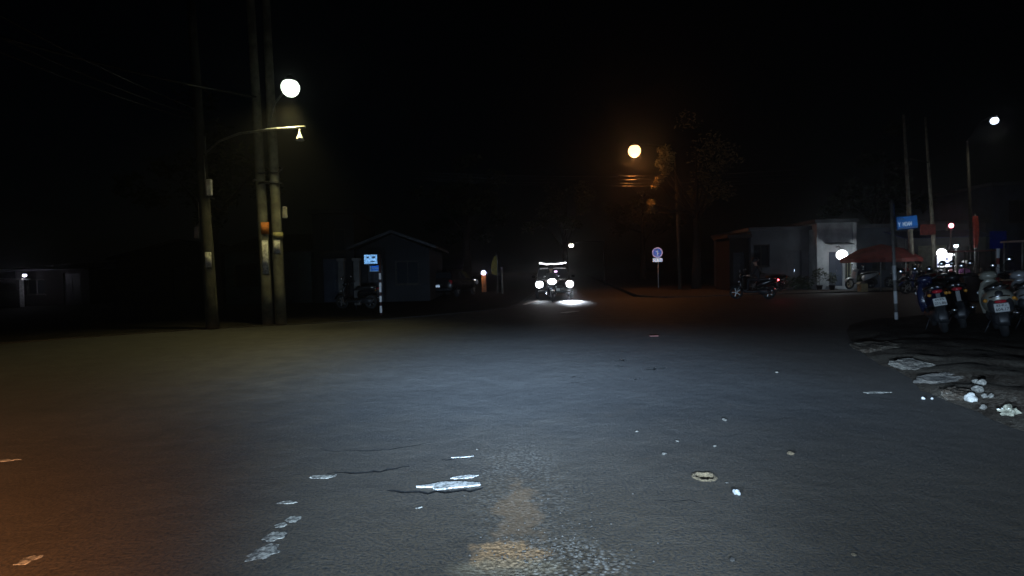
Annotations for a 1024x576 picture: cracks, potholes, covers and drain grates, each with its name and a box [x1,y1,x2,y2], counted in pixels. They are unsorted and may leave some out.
pothole [692,472,718,482]
crack [324,441,483,495]
